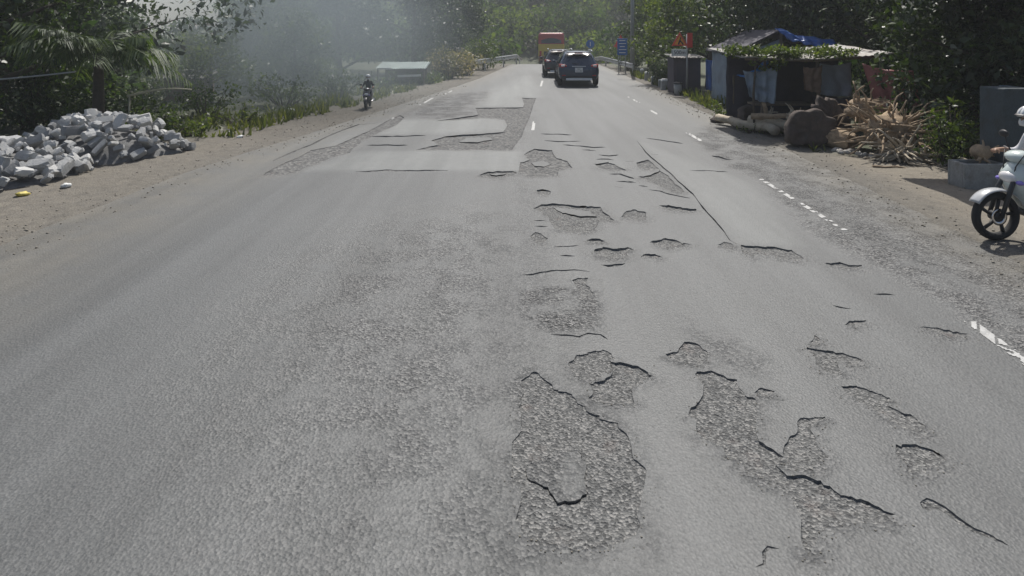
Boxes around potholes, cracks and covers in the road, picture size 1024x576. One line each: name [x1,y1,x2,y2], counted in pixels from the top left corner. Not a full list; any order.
pothole [688,370,894,556]
pothole [806,348,864,374]
pothole [533,203,613,233]
crack [920,498,1010,546]
pothole [572,278,593,298]
pothole [637,160,659,170]
pothole [594,247,633,259]
pothole [842,385,925,431]
pothole [589,362,652,404]
crack [692,156,733,172]
pothole [651,238,690,249]
pothole [519,149,572,177]
